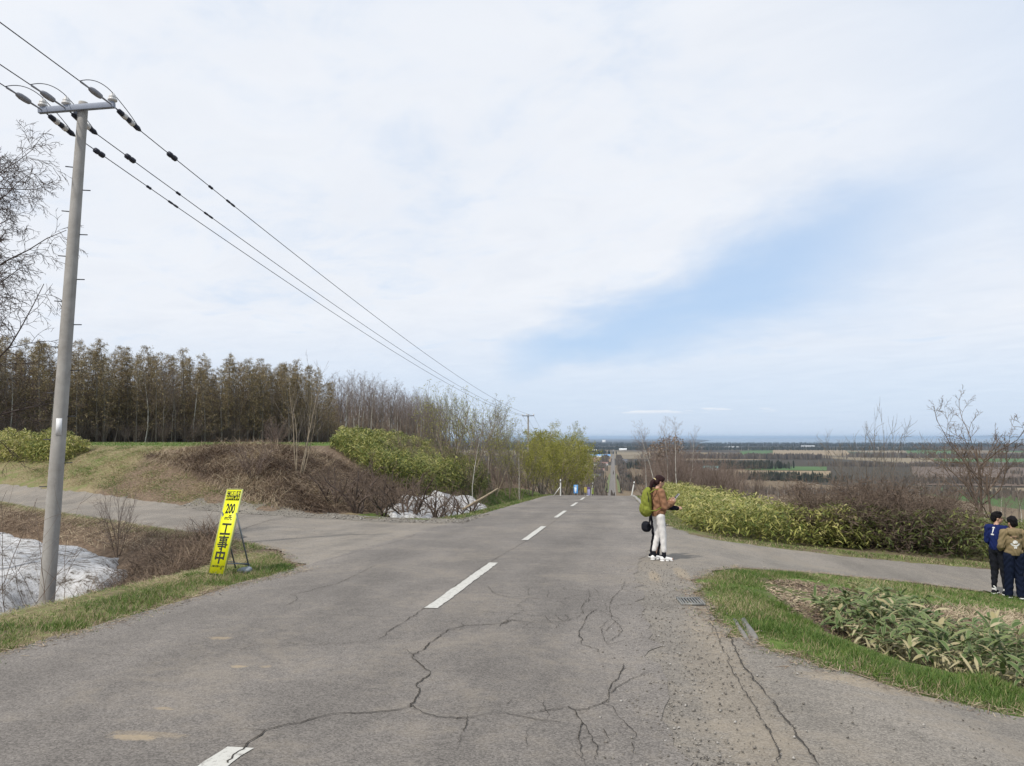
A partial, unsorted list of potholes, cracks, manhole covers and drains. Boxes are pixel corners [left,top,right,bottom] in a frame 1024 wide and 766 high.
drain grate [676,597,706,606]
crack [706,606,819,764]
crack [227,585,649,766]
